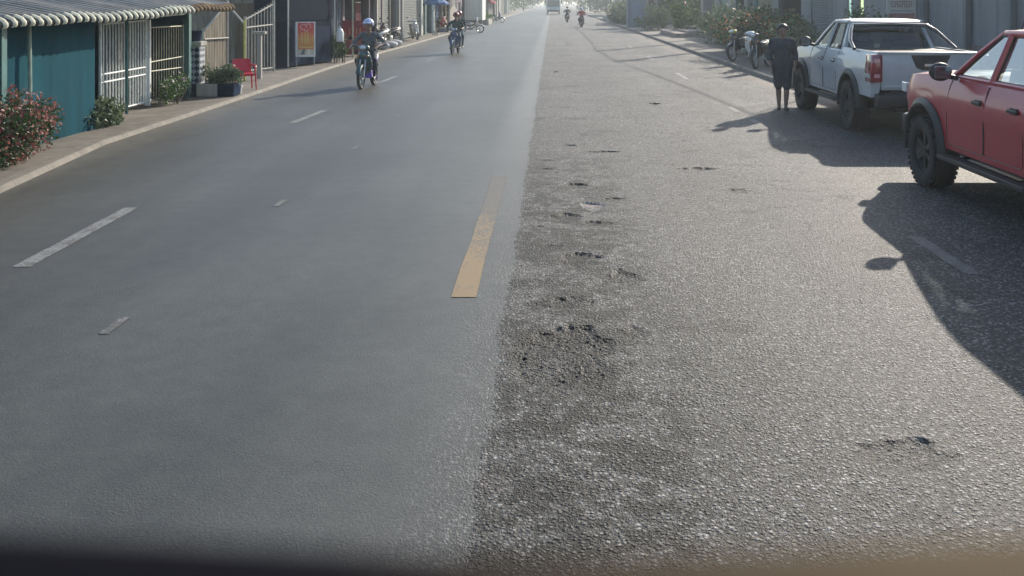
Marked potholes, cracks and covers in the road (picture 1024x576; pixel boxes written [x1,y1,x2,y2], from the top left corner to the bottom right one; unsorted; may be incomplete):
pothole [546,212,583,224]
pothole [579,202,606,211]
pothole [853,436,970,473]
pothole [602,268,647,288]
pothole [558,251,606,269]
pothole [506,323,616,395]
